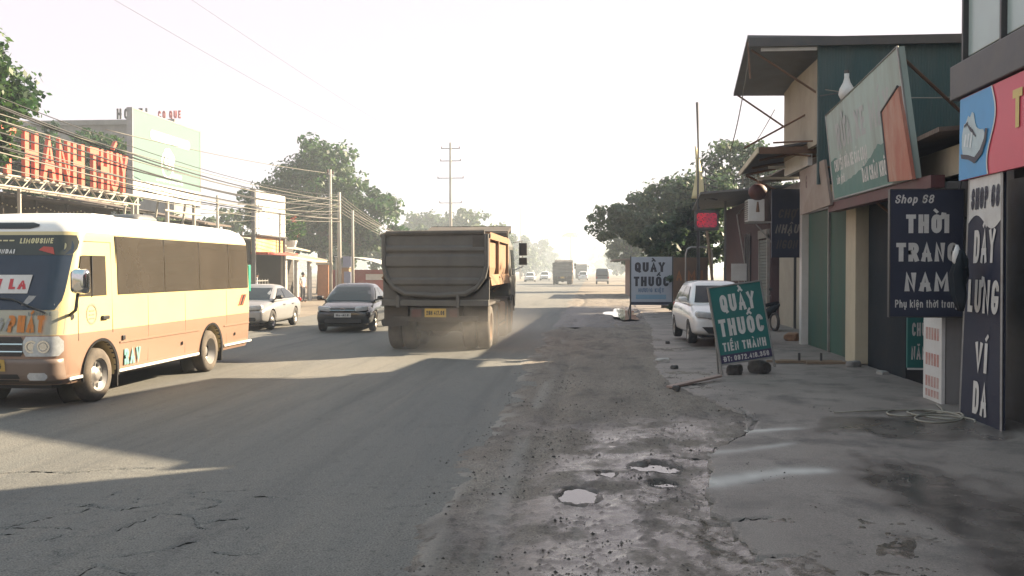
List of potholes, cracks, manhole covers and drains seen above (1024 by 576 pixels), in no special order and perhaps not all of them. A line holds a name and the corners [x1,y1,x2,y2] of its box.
pothole [626,458,683,475]
pothole [552,485,604,508]
pothole [592,469,619,478]
pothole [643,478,679,488]
crack [2,492,266,576]
